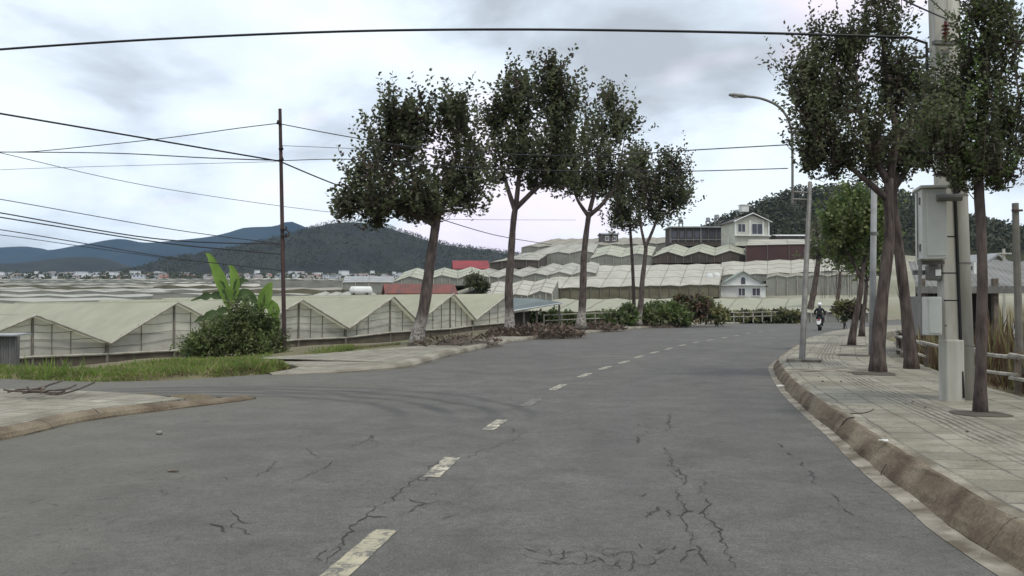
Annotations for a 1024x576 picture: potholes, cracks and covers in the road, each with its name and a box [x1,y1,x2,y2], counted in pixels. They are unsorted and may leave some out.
crack [521,413,736,570]
crack [209,511,255,536]
crack [309,460,493,563]
